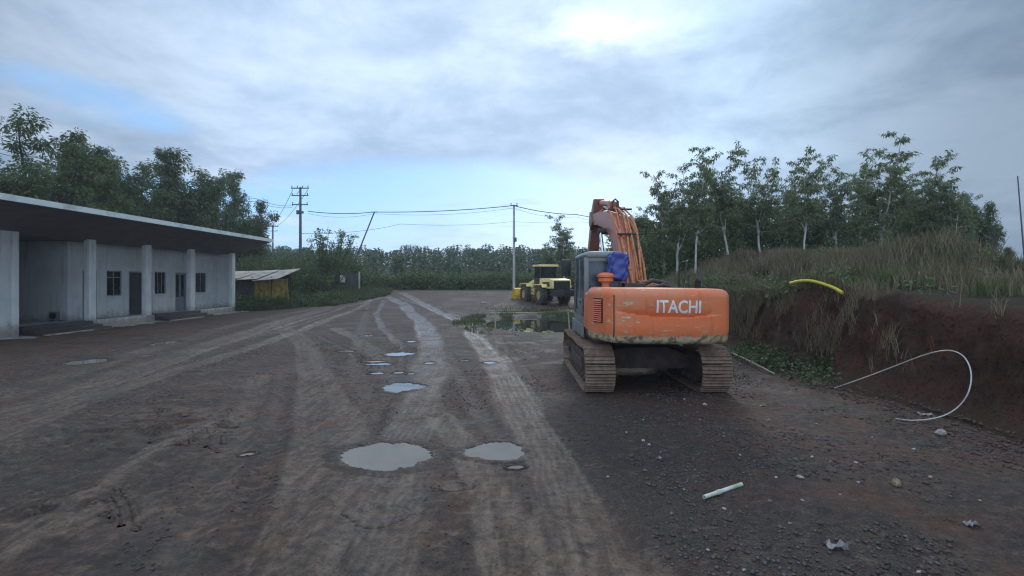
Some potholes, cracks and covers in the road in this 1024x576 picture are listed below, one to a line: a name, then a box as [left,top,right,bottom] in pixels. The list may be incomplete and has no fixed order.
pothole [449,438,538,465]
pothole [52,357,120,366]
pothole [321,437,452,478]
pothole [373,380,435,395]
pothole [341,503,411,529]
pothole [430,480,476,492]
